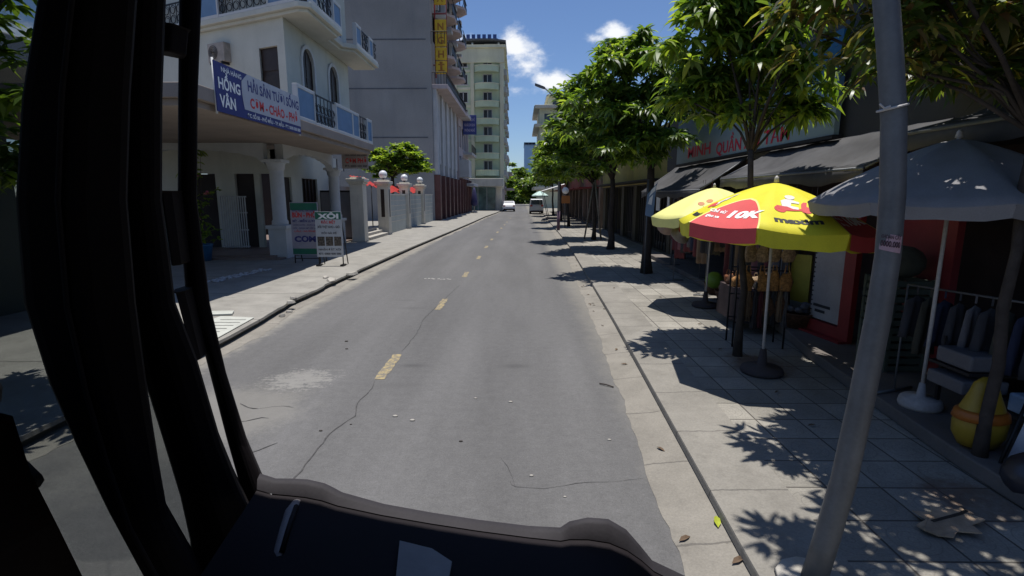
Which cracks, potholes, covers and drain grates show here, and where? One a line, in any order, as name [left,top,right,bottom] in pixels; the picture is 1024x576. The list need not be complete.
crack [240,289,455,479]
